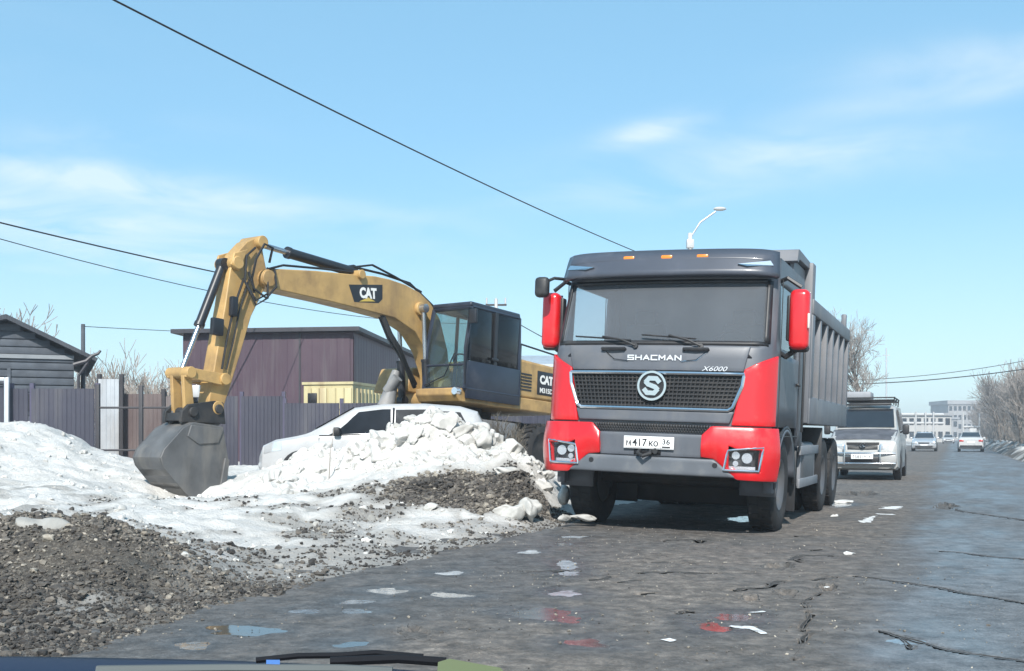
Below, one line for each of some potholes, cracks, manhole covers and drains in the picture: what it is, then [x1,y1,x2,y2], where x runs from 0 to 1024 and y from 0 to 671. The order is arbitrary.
crack [589,535,838,661]
pothole [929,501,964,511]
crack [855,576,1024,604]
crack [948,507,1024,521]
crack [878,630,1024,663]
